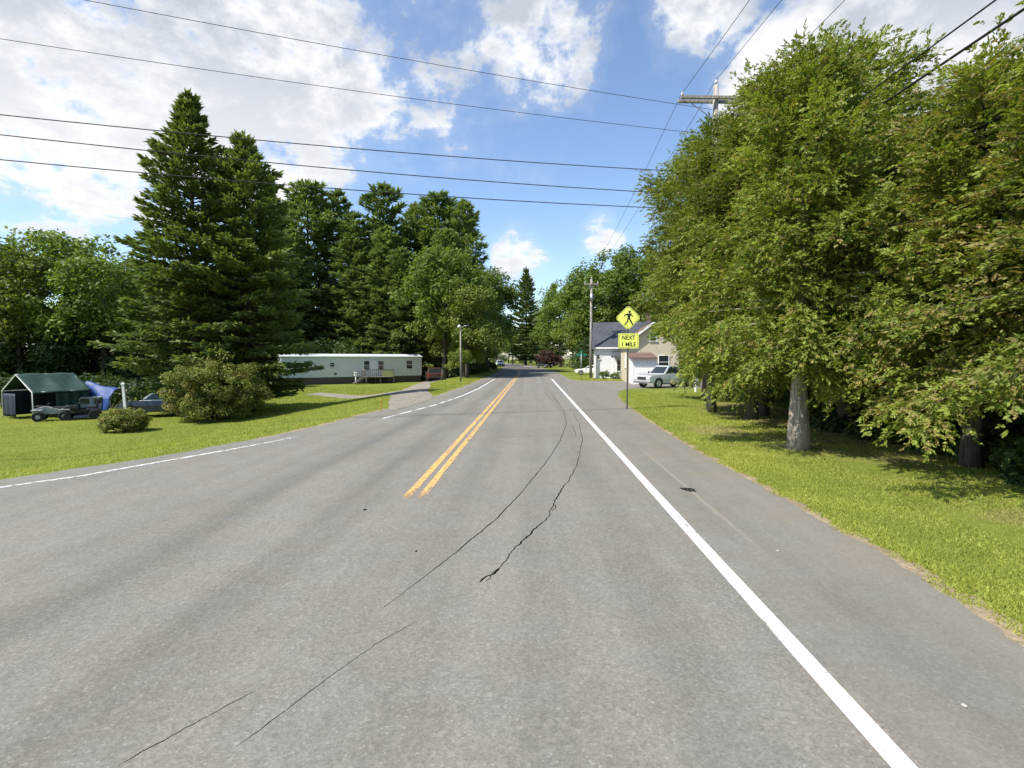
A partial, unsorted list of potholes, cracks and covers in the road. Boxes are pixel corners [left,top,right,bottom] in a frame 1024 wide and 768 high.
crack [118,692,253,766]
crack [236,623,413,747]
crack [384,395,583,607]
